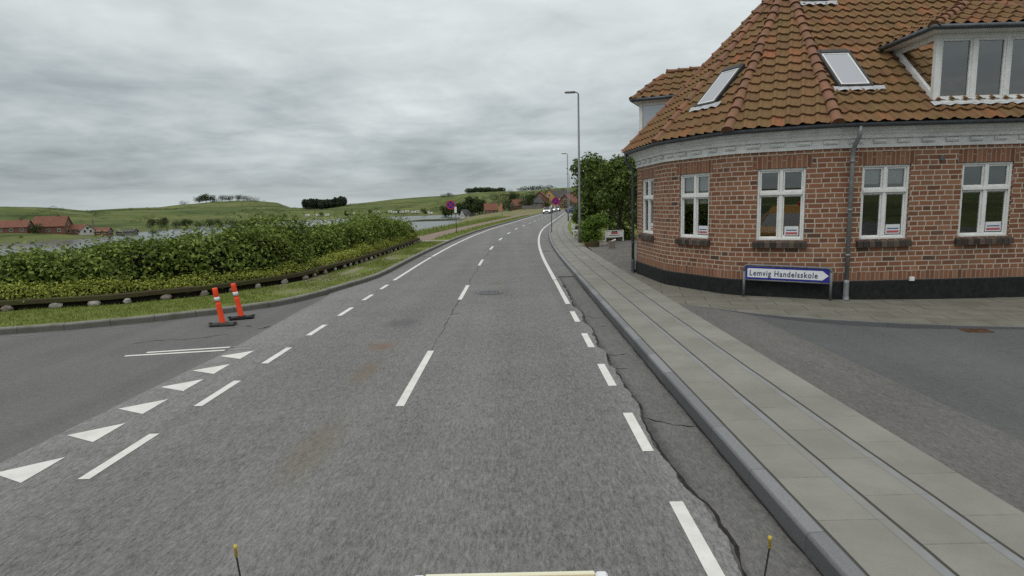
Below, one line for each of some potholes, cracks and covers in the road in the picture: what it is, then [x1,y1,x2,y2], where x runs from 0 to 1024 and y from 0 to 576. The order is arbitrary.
crack [557,277,747,576]
